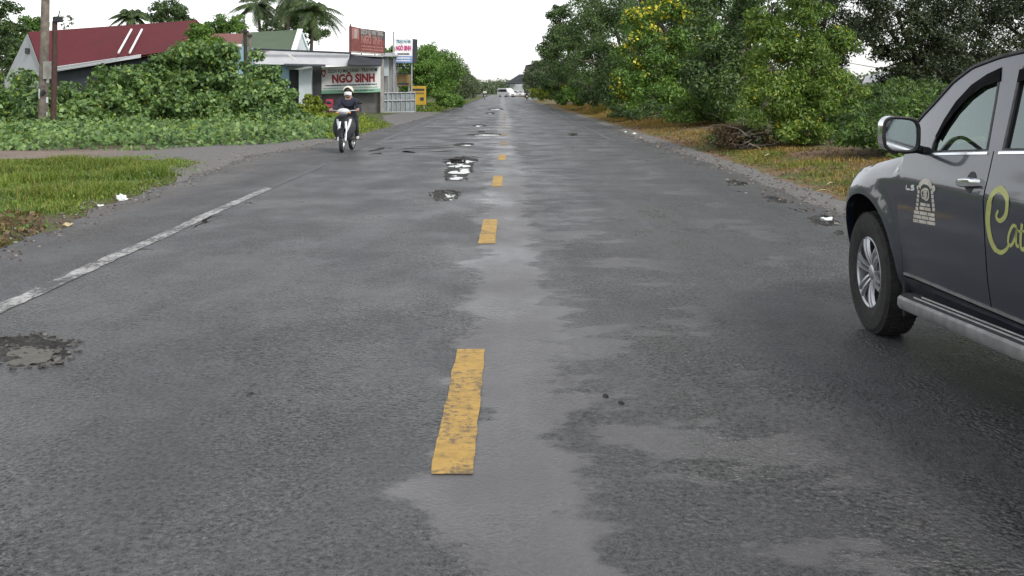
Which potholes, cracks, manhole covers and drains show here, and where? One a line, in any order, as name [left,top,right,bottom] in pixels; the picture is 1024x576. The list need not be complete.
pothole [429,190,462,201]
pothole [763,195,795,204]
pothole [0,330,84,370]
pothole [442,156,478,181]
pothole [807,213,840,227]
